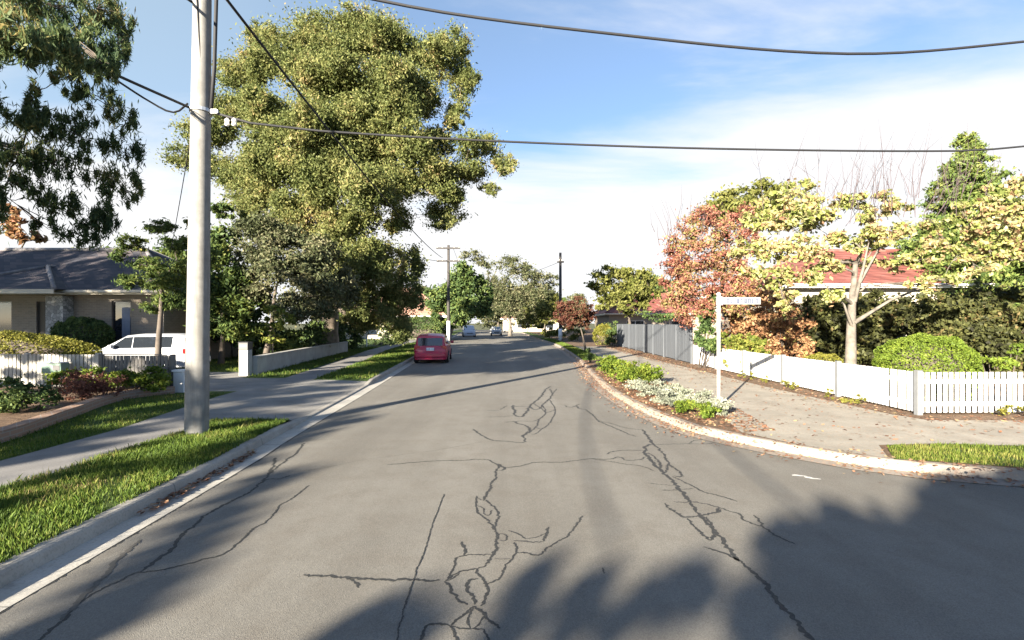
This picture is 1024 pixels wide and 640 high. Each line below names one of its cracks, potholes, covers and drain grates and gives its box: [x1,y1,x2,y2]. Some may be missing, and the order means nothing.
crack [0,368,654,620]
